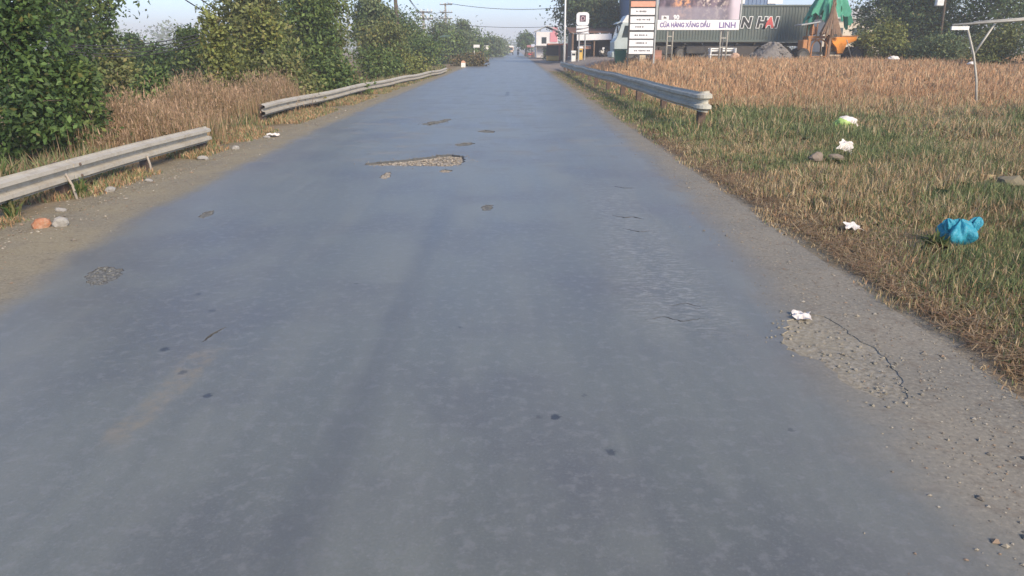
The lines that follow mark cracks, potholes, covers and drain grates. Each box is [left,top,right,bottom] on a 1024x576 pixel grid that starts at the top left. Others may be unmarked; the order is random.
pothole [354,154,478,169]
pothole [85,266,125,285]
